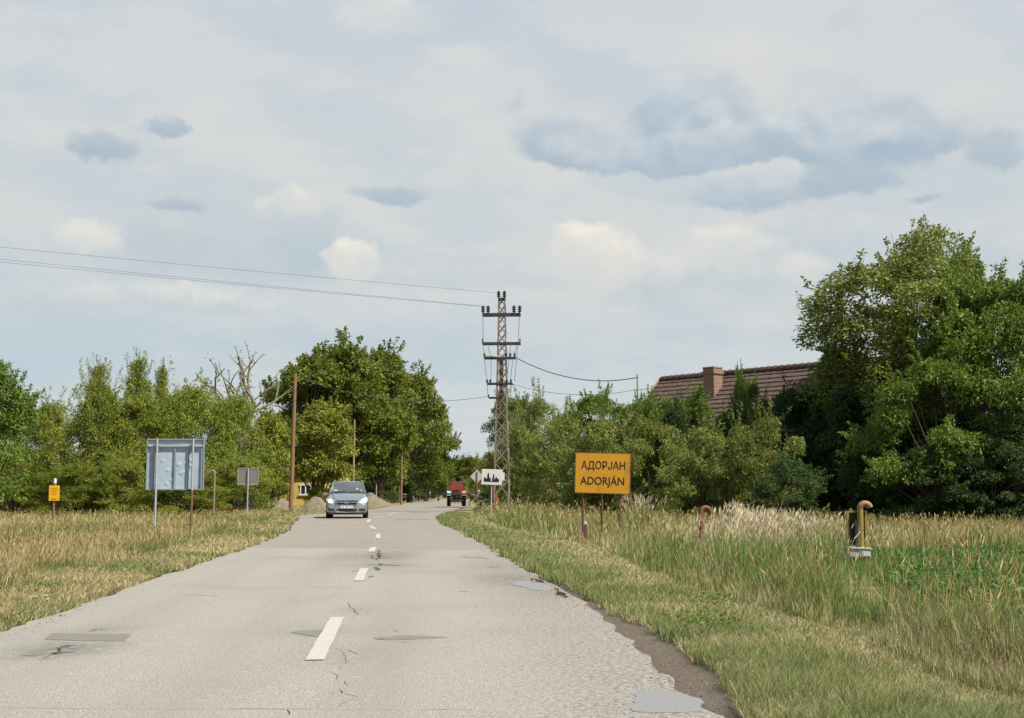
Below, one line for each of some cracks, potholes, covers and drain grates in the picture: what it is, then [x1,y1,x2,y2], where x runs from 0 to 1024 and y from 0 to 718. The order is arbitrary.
crack [21,628,106,659]
crack [330,648,359,705]
crack [347,550,400,618]
